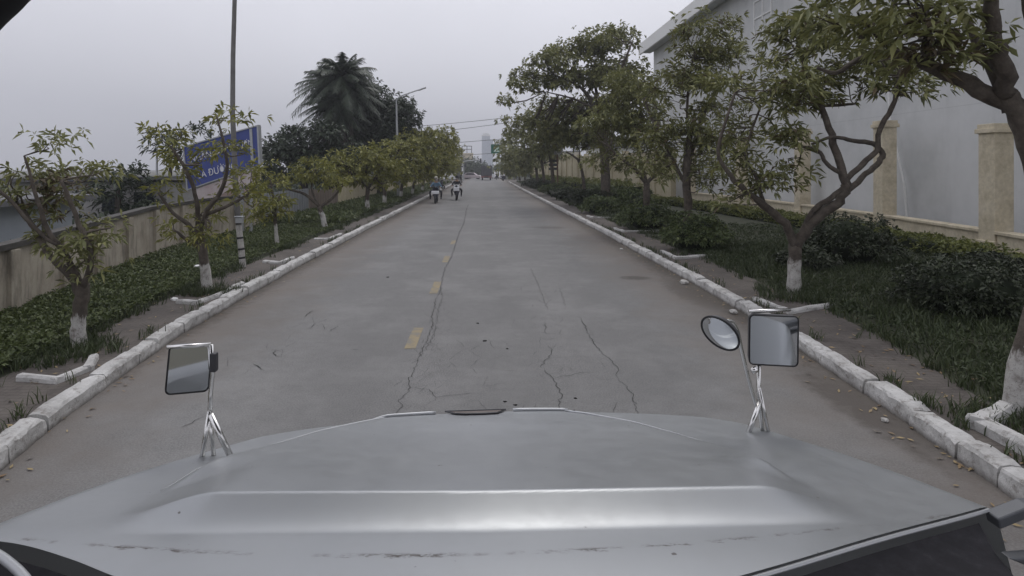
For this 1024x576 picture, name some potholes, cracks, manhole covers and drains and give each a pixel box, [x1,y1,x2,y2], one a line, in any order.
crack [393,208,638,414]
